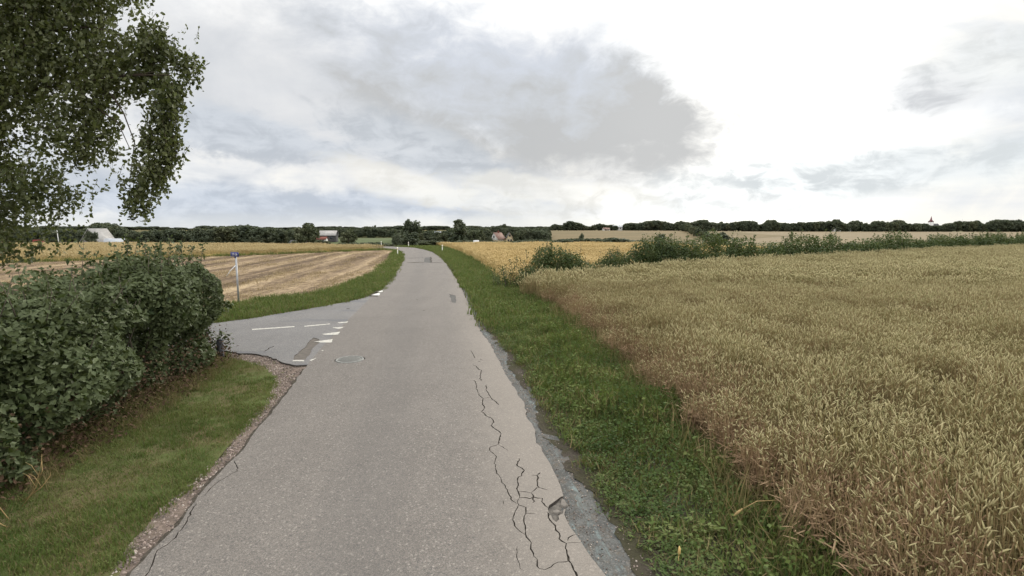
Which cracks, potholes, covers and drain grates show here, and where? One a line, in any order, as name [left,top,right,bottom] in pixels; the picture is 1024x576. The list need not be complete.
pothole [548,498,569,522]
crack [475,382,577,576]
